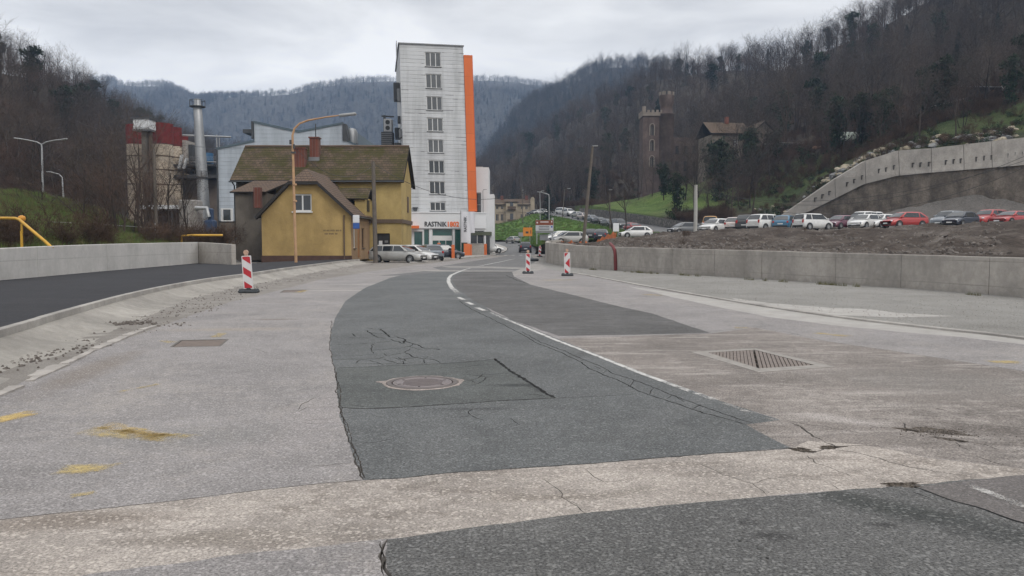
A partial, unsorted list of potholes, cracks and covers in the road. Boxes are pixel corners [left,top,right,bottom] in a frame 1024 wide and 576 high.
crack [866,408,1019,468]
manhole cover [170,339,229,347]
pothole [892,427,974,436]
crack [747,419,958,490]
manhole cover [376,376,464,391]
drain grate [692,348,834,372]
crack [298,301,754,480]
